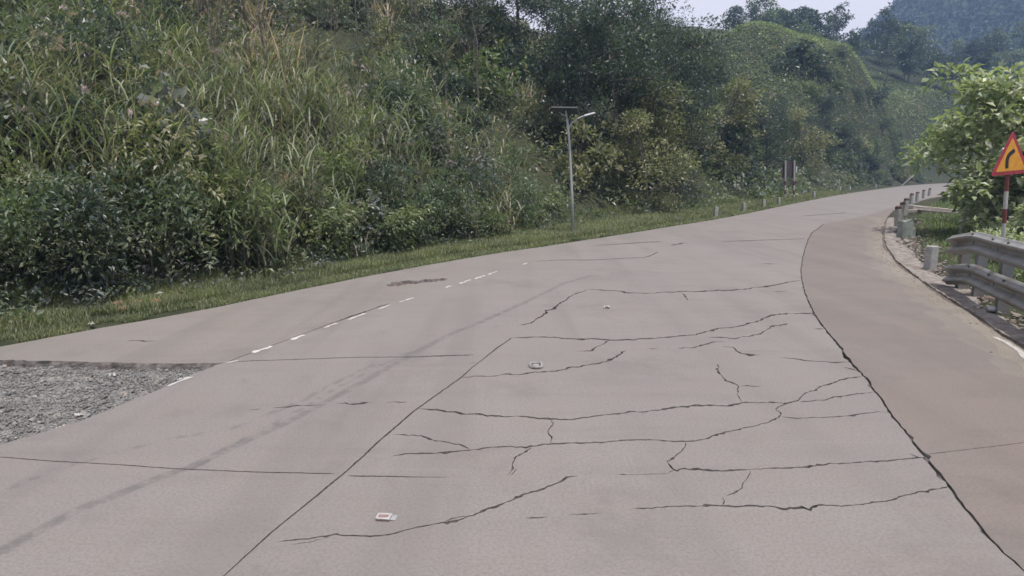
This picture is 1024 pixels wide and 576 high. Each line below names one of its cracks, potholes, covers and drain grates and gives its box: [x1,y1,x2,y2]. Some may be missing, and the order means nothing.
crack [224,213,1024,576]
